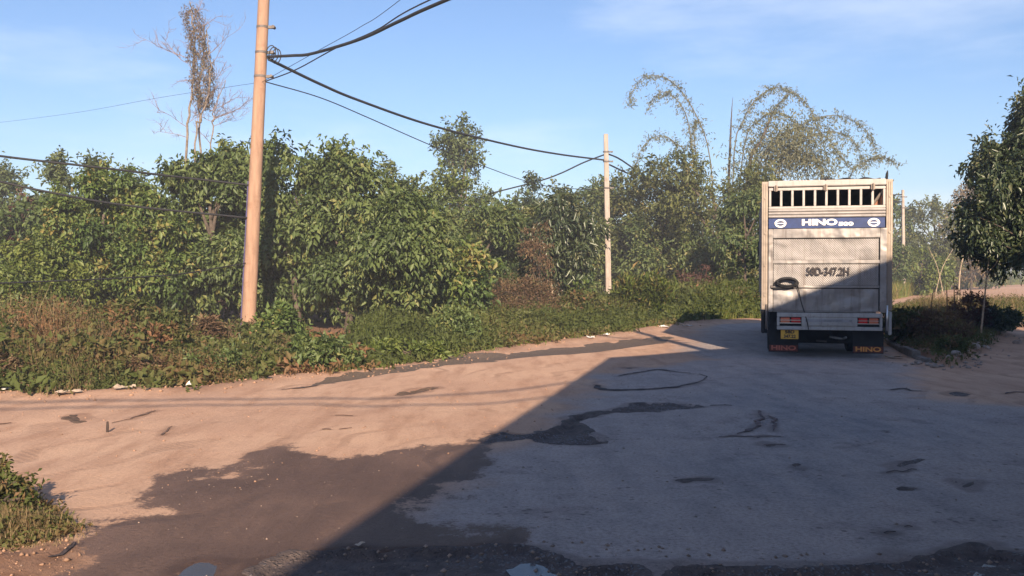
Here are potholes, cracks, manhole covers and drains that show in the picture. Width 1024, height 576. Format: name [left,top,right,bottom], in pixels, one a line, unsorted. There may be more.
pothole [61,414,87,423]
pothole [581,407,647,419]
pothole [519,411,608,445]
pothole [478,432,540,443]
pothole [395,387,438,396]
pothole [662,542,1024,576]
crack [719,410,785,445]
pothole [242,543,653,576]
pothole [623,402,704,412]
